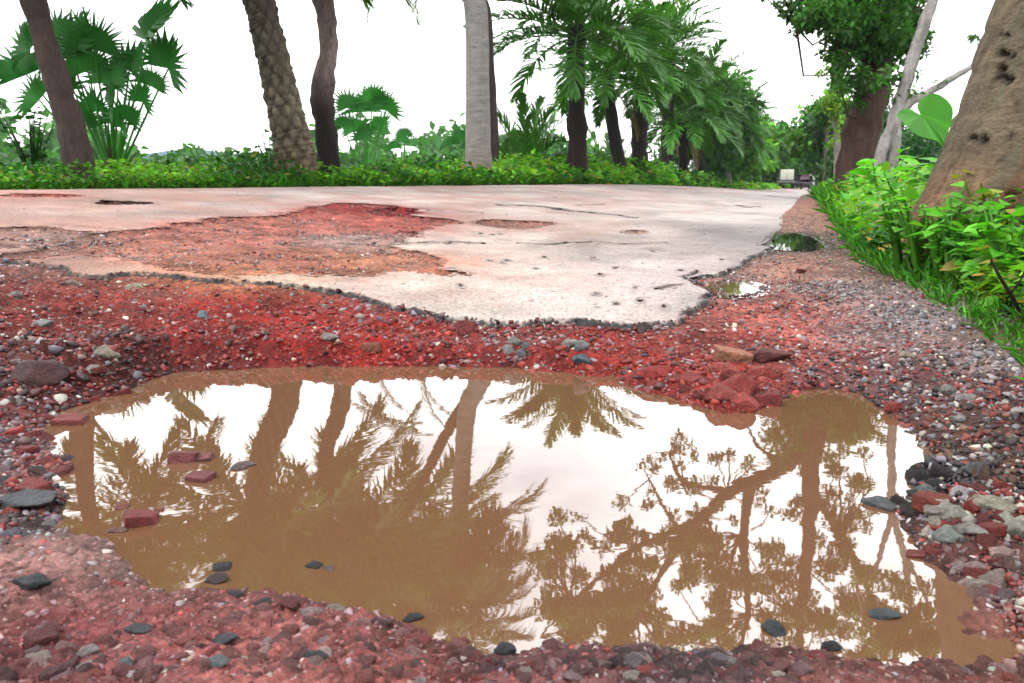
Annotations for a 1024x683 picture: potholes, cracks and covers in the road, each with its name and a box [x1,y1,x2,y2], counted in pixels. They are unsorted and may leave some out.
pothole [0,263,1024,683]
pothole [469,218,556,229]
crack [412,240,481,251]
pothole [0,202,476,278]
crack [500,204,634,218]
pothole [756,233,830,251]
